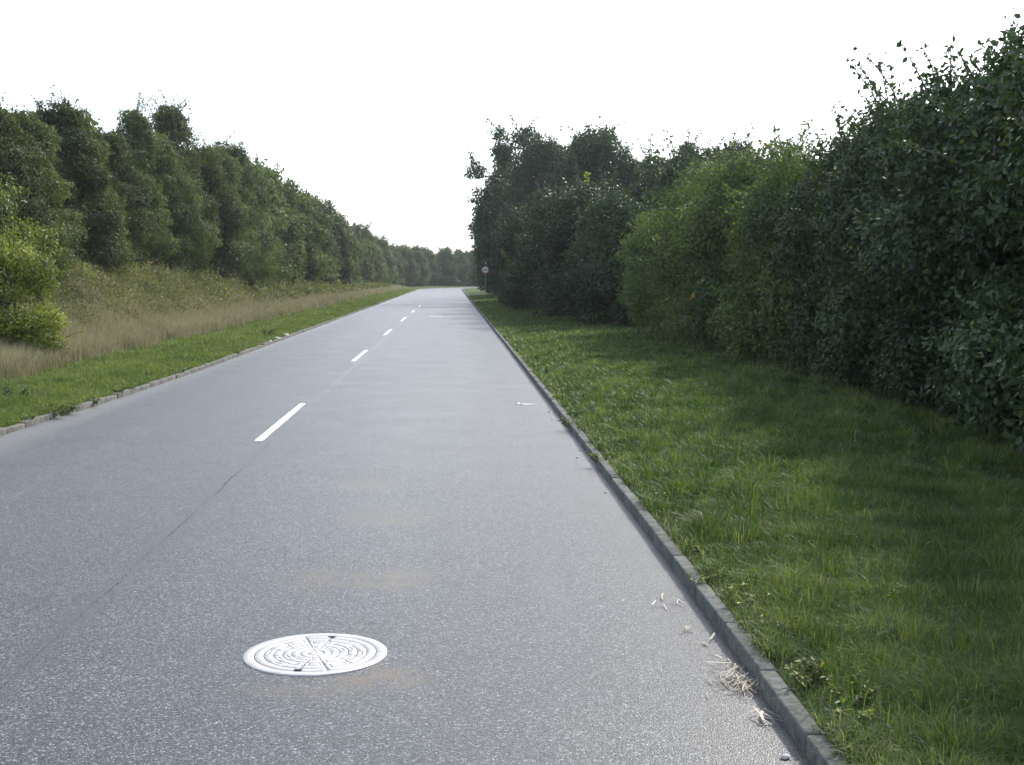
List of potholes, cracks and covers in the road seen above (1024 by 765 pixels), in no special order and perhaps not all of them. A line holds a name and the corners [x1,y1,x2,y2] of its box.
manhole cover [243,633,387,676]
crack [1,442,271,688]
